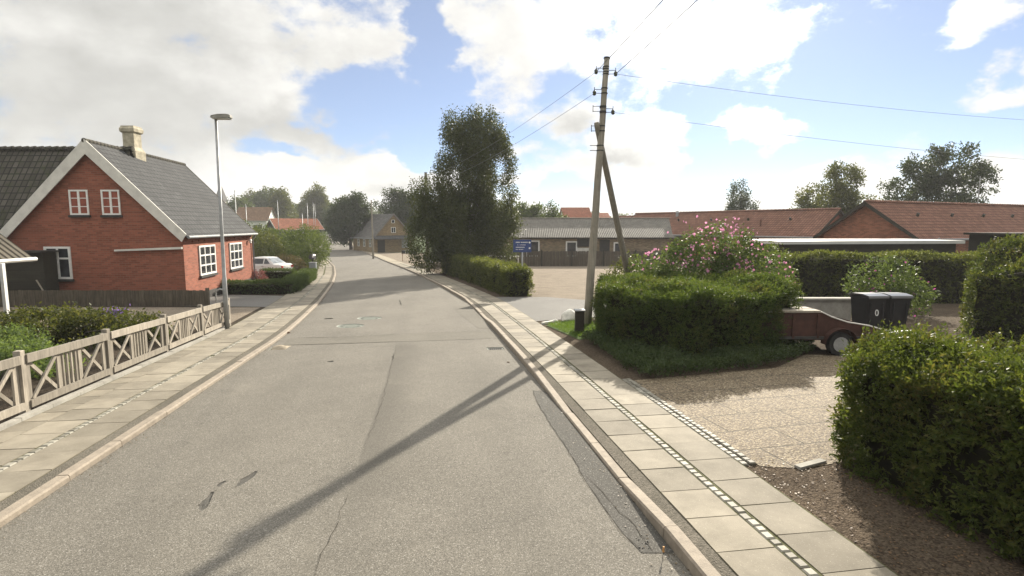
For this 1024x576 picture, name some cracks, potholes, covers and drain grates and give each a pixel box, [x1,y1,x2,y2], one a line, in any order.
crack [301,330,493,443]
